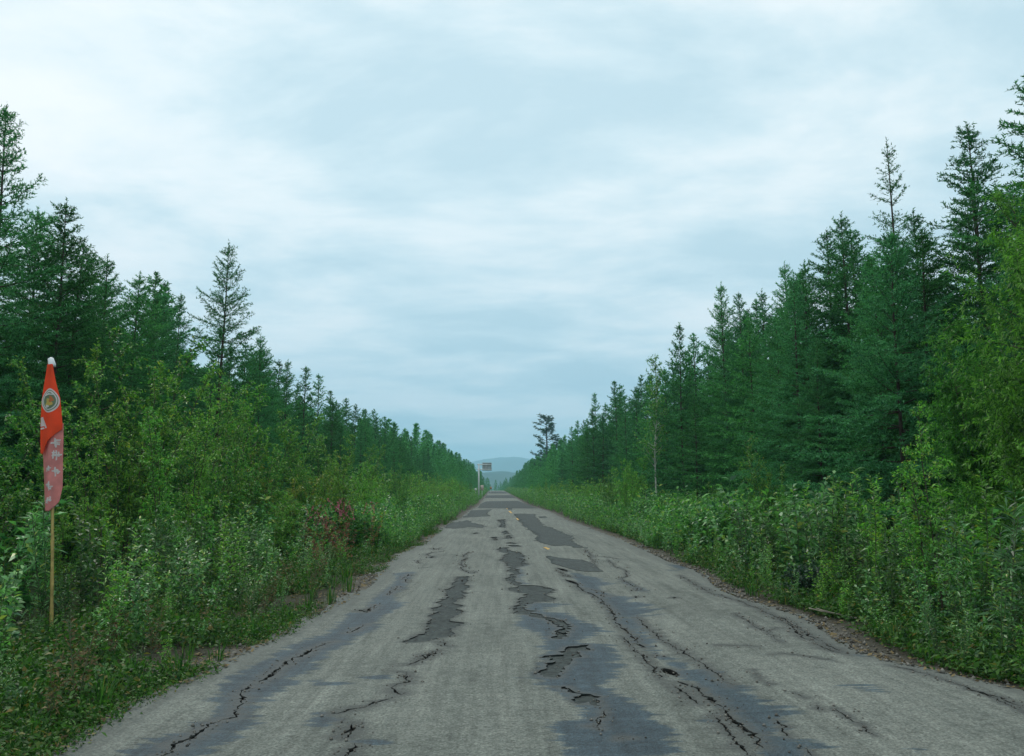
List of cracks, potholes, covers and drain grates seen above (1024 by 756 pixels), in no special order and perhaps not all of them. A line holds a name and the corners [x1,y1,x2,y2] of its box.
crack [680,576,840,659]
crack [562,573,812,756]
crack [161,553,430,756]
